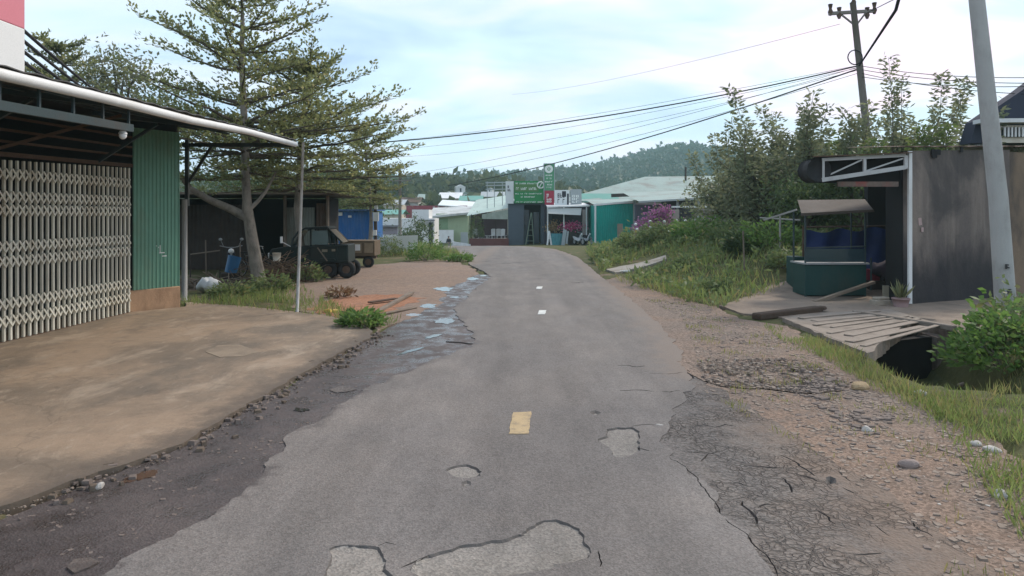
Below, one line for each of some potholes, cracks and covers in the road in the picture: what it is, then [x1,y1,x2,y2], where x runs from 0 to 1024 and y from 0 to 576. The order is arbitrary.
pothole [324,545,393,576]
pothole [446,464,482,478]
pothole [598,427,640,457]
crack [740,455,817,524]
crack [686,452,721,514]
pothole [410,519,591,576]
crack [620,365,694,392]
